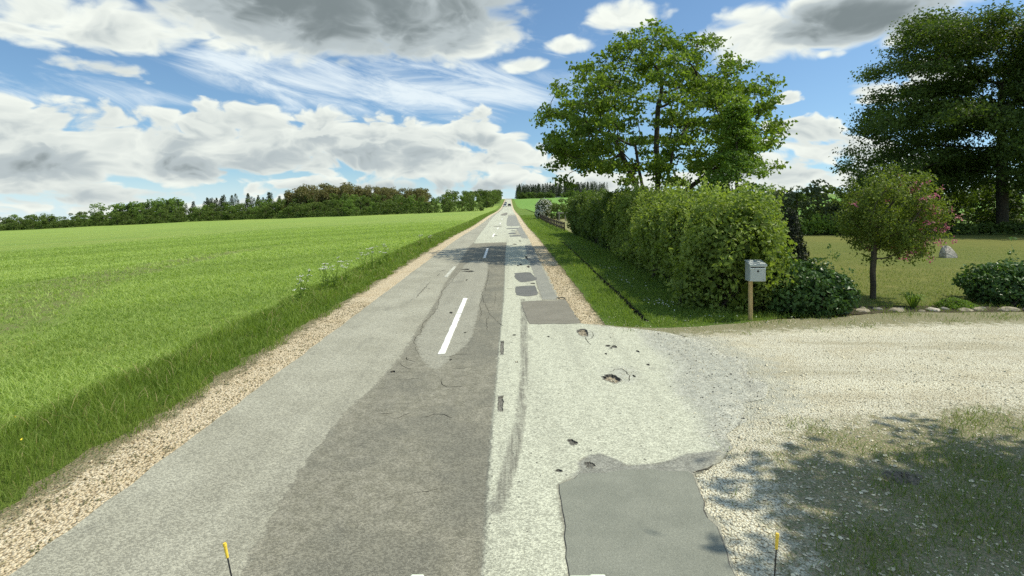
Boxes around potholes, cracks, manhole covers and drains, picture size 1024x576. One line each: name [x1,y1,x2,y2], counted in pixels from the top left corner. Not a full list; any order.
pothole [601,374,622,384]
